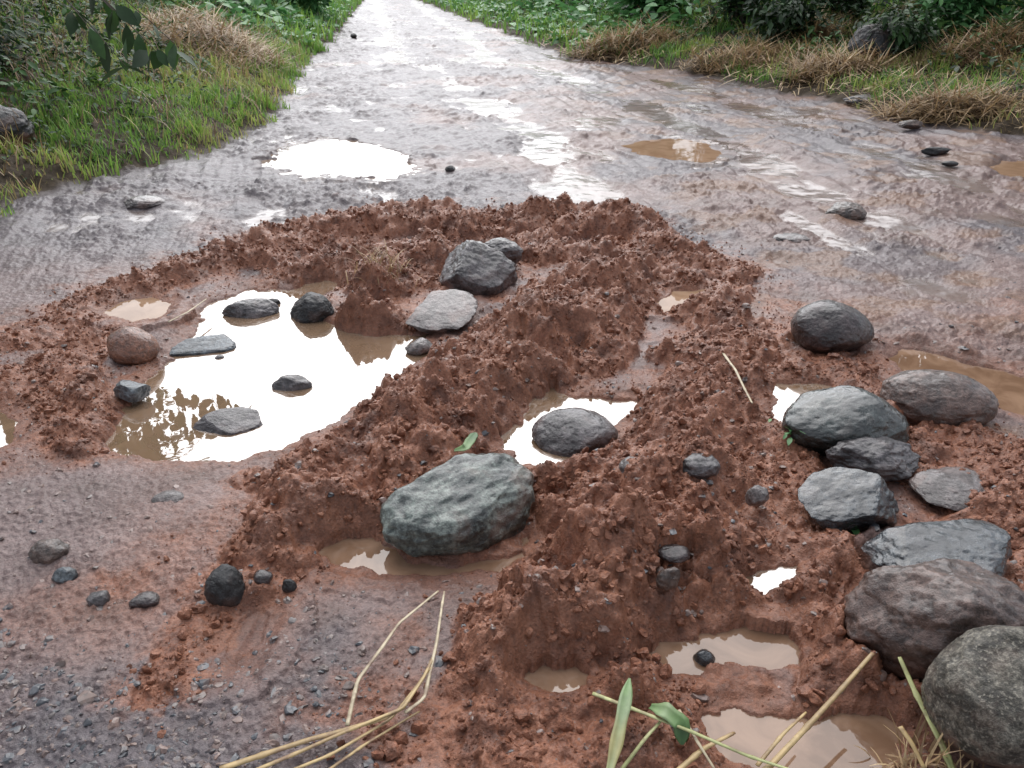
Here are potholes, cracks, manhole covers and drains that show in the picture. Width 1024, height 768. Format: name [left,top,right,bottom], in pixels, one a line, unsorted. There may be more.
pothole [492,364,645,468]
pothole [686,681,922,768]
pothole [304,508,541,581]
pothole [633,596,821,703]
pothole [618,135,727,163]
pothole [511,622,614,699]
pothole [86,263,442,464]
pothole [252,136,429,183]
